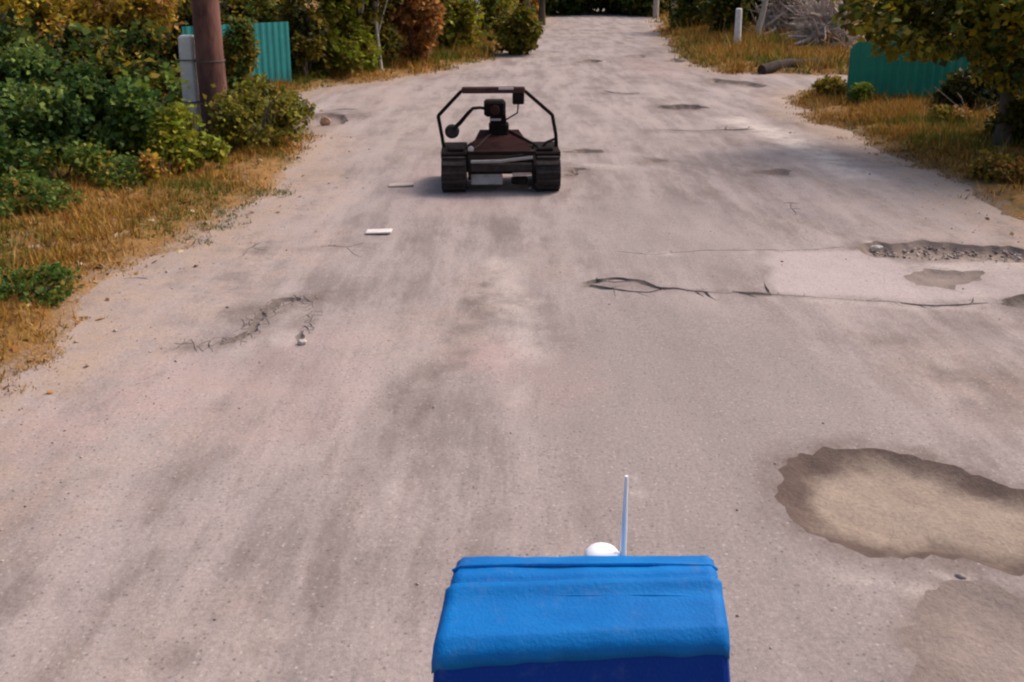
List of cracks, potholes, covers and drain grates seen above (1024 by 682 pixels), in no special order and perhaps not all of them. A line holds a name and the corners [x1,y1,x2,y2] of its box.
crack [583,277,729,299]
pothole [298,113,348,127]
pothole [901,580,1024,682]
crack [617,247,838,255]
pothole [774,446,1024,576]
pothole [854,240,1024,263]
pothole [706,79,767,88]
pothole [903,268,985,290]
crack [174,295,323,352]
